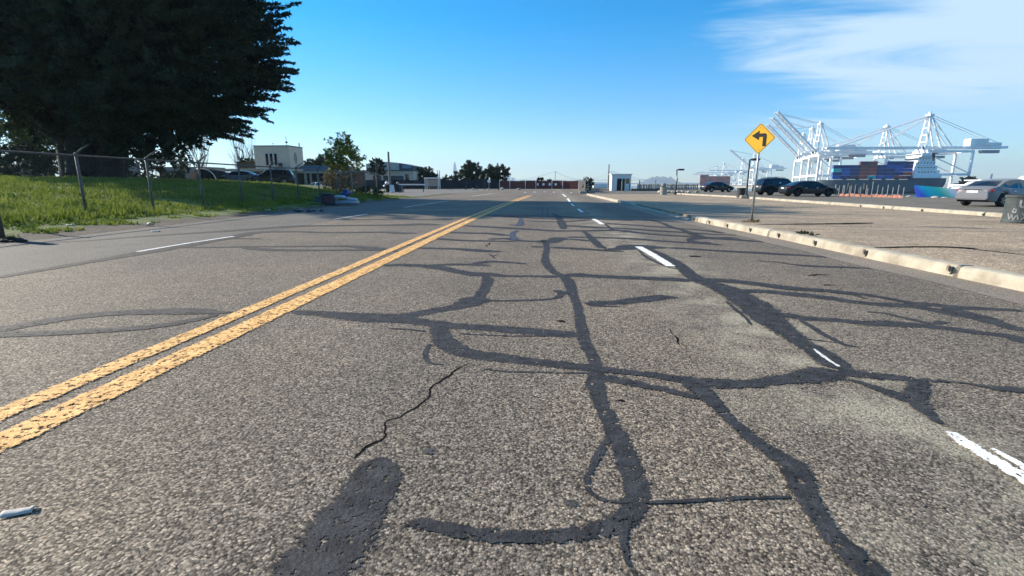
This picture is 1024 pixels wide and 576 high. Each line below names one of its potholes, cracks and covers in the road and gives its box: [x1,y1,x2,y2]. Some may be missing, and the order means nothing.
crack [354,363,469,458]
